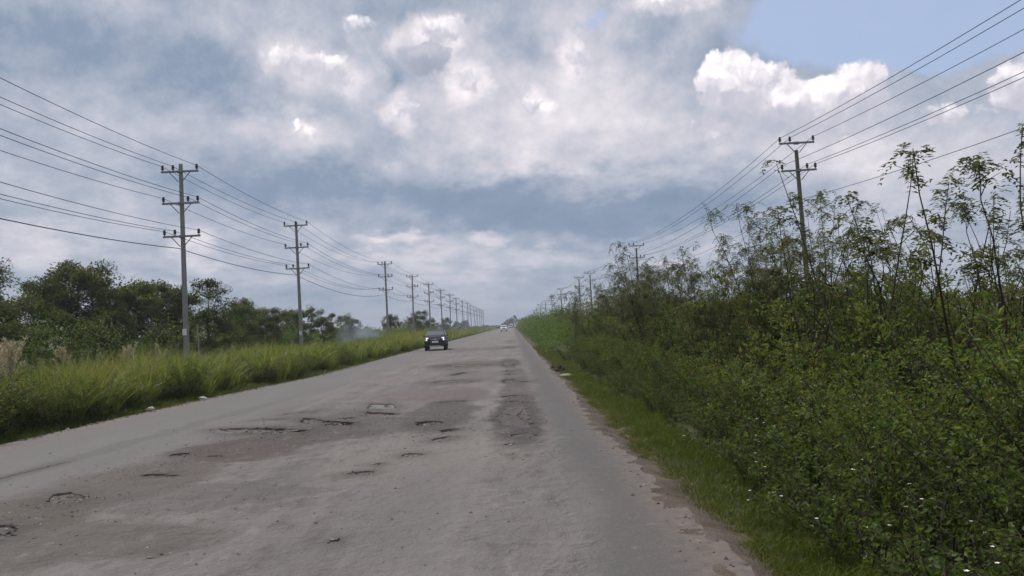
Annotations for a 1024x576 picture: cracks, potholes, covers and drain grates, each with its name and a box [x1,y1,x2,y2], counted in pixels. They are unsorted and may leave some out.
pothole [209,427,312,435]
pothole [45,492,90,504]
pothole [299,417,360,426]
pothole [0,524,22,539]
